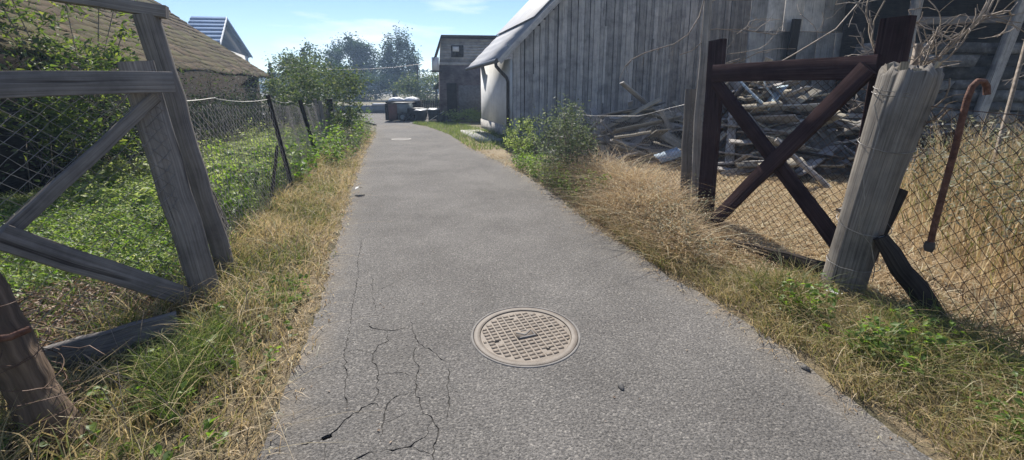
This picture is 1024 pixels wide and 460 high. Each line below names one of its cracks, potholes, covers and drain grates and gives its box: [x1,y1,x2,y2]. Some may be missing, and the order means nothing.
crack [295,240,459,460]
manhole cover [471,306,581,368]
